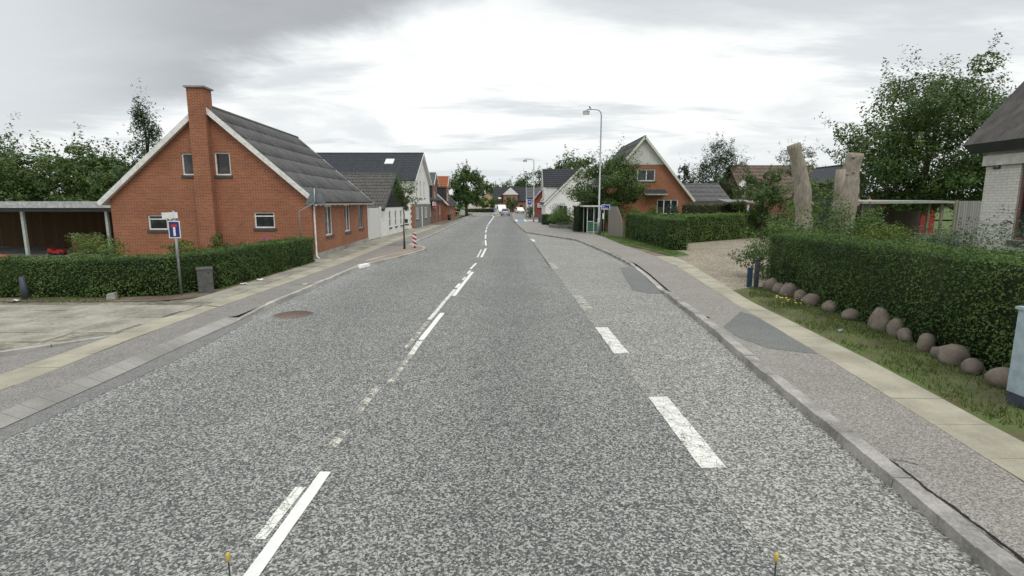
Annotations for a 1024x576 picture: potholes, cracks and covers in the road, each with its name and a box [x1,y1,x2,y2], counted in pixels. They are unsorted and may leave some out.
crack [891,459,1024,562]
